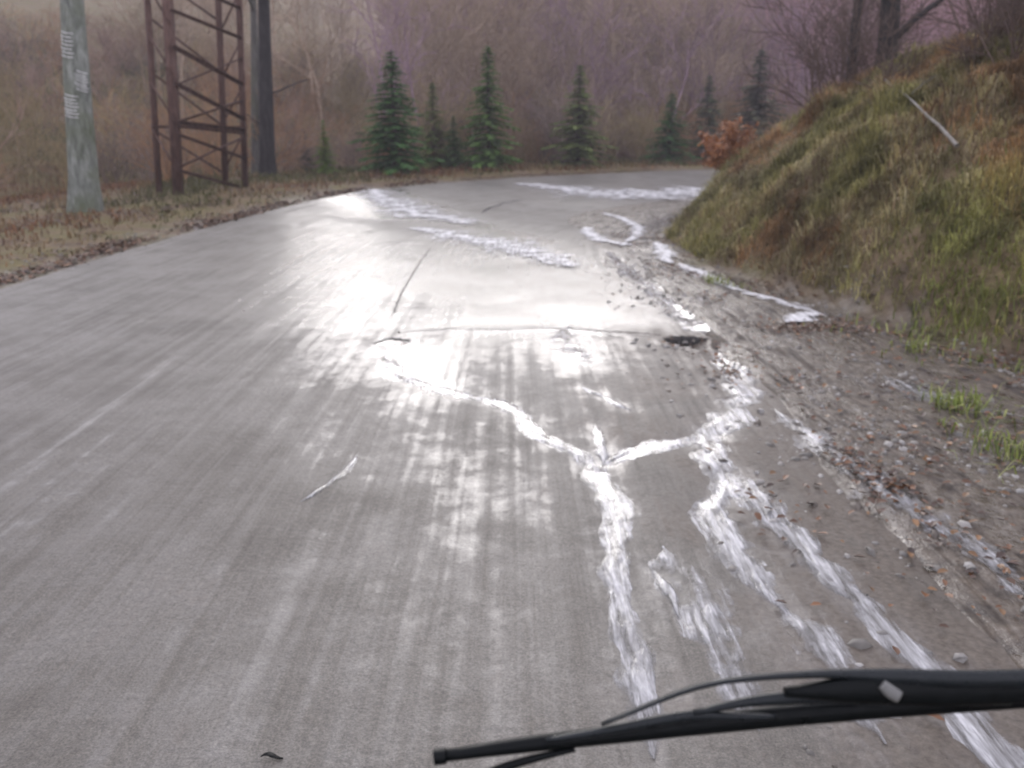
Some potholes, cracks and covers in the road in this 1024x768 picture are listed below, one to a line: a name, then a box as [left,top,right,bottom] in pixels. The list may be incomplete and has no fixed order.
crack [477,198,528,213]
crack [371,241,664,338]
pothole [653,333,727,353]
